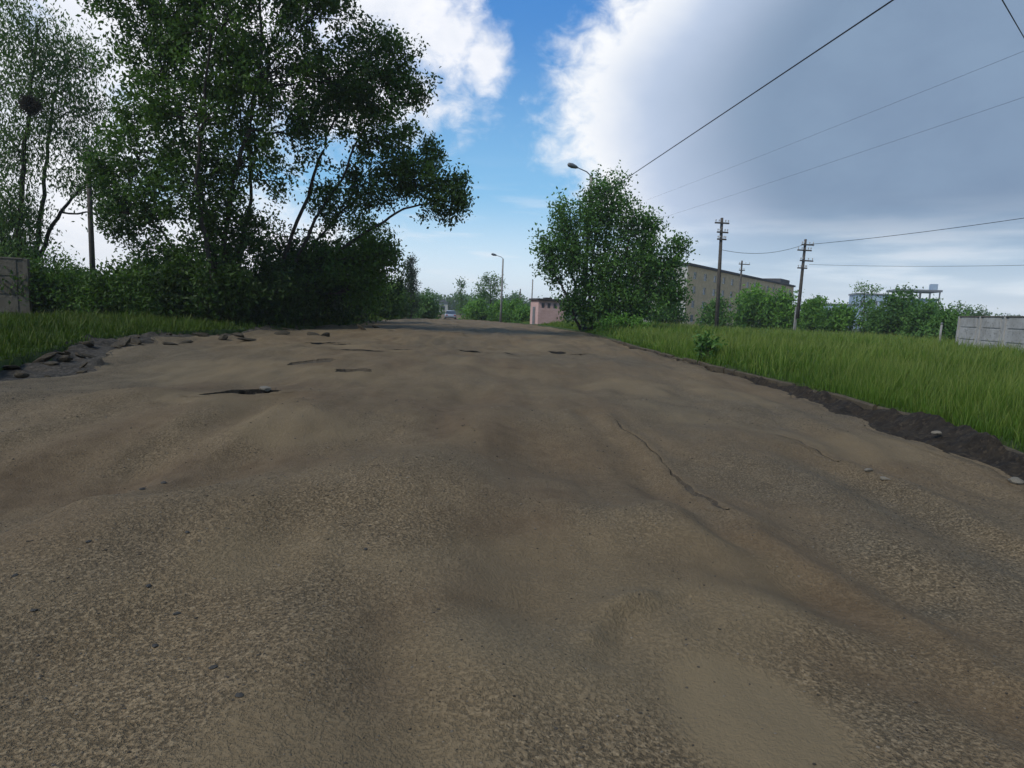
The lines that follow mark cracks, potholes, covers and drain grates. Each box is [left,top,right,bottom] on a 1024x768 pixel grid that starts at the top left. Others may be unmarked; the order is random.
pothole [322,366,386,376]
pothole [273,357,348,367]
crack [775,434,840,463]
crack [597,413,737,512]
pothole [183,389,298,397]
